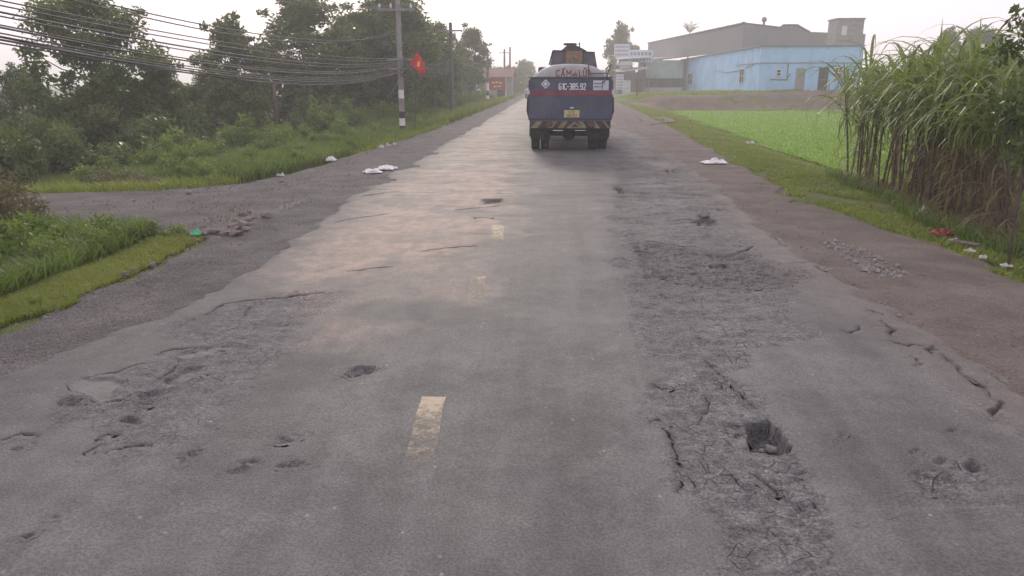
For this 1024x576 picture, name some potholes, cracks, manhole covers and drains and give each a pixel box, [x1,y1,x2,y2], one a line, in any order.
pothole [65,374,128,405]
crack [83,430,155,456]
crack [647,358,814,499]
pothole [114,414,151,429]
pothole [738,417,801,458]
pothole [268,454,322,472]
pothole [338,364,385,380]
pothole [212,454,273,480]
crack [836,309,1009,401]
pothole [957,455,987,476]
pothole [265,431,312,446]
